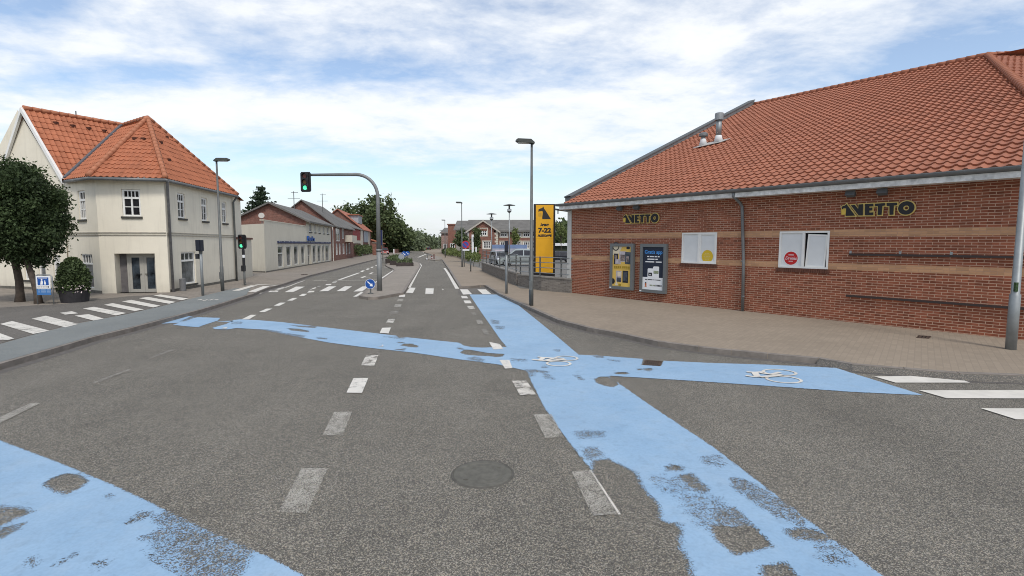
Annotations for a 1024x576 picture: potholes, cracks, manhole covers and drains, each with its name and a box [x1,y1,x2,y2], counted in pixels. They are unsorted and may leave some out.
manhole cover [451,460,514,489]
